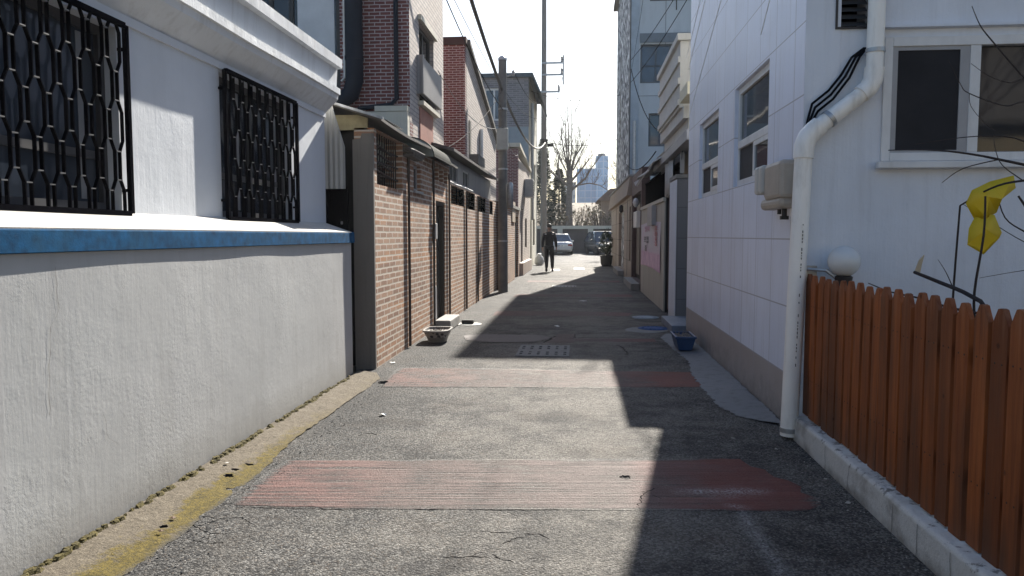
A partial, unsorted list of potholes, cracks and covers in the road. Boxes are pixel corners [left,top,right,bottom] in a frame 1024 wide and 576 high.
crack [193,507,378,543]
crack [443,531,549,562]
